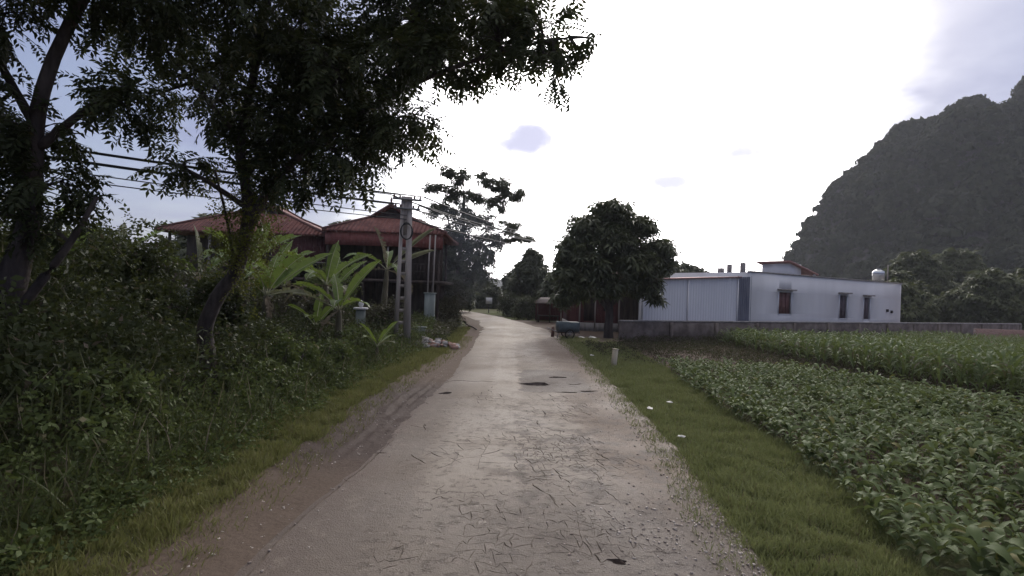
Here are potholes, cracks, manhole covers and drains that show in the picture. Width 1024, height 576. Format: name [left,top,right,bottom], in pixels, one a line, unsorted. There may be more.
crack [246,425,507,576]
crack [373,384,680,576]
